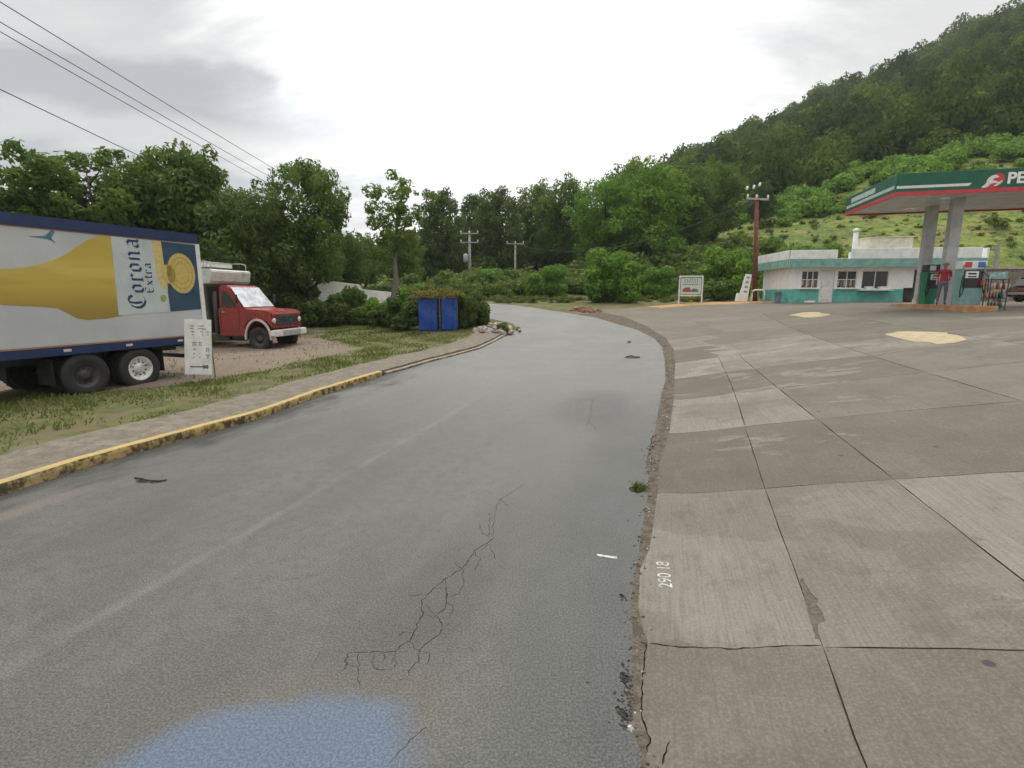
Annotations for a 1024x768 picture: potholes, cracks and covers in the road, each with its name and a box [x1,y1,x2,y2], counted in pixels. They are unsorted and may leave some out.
pothole [800,578,825,641]
crack [340,485,522,760]
crack [640,643,822,765]
